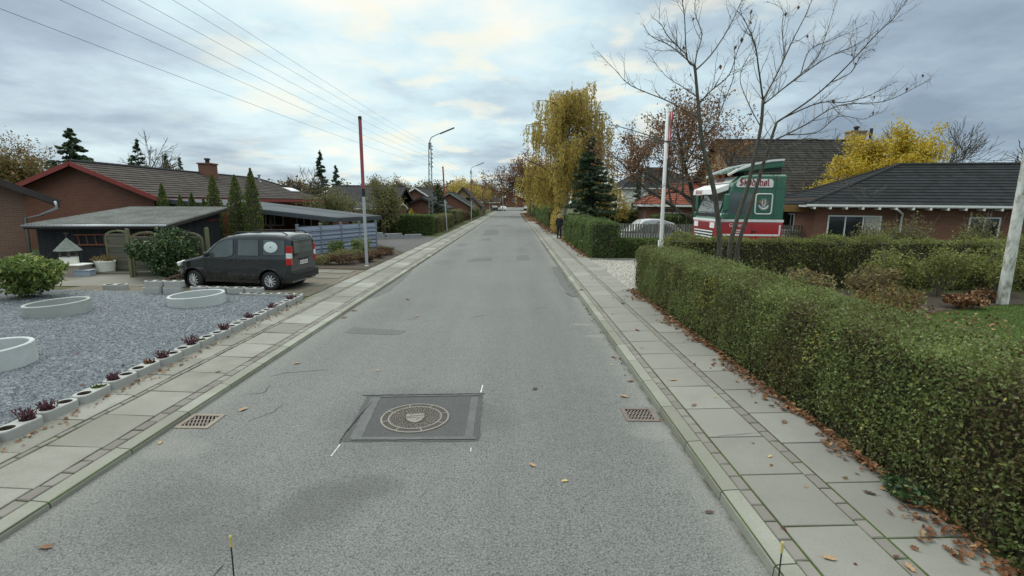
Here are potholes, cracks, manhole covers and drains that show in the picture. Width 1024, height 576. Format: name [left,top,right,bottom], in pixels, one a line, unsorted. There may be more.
manhole cover [380,404,450,433]
